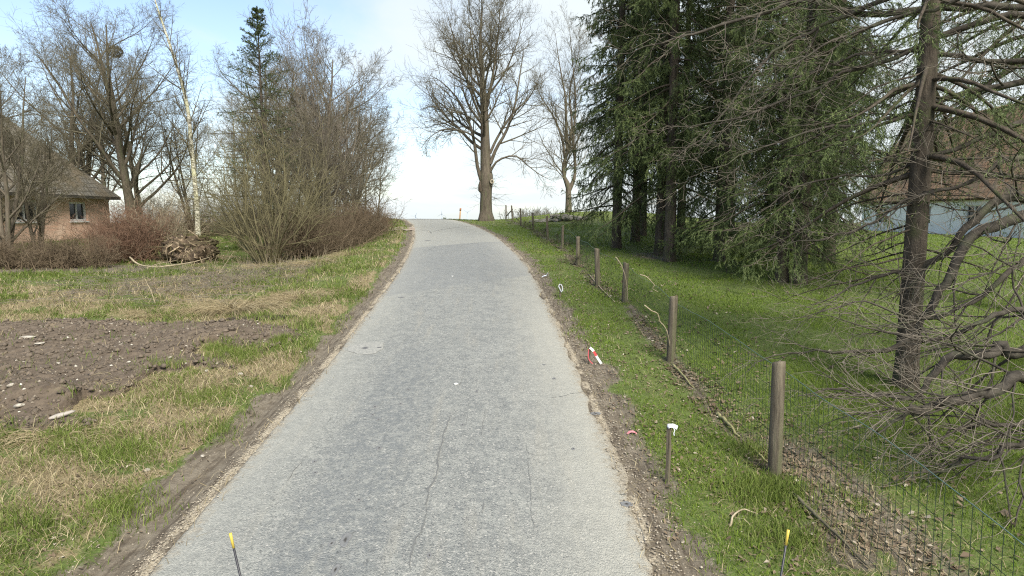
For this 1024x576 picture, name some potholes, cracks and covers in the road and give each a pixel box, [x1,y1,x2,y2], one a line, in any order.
crack [409,405,485,570]
